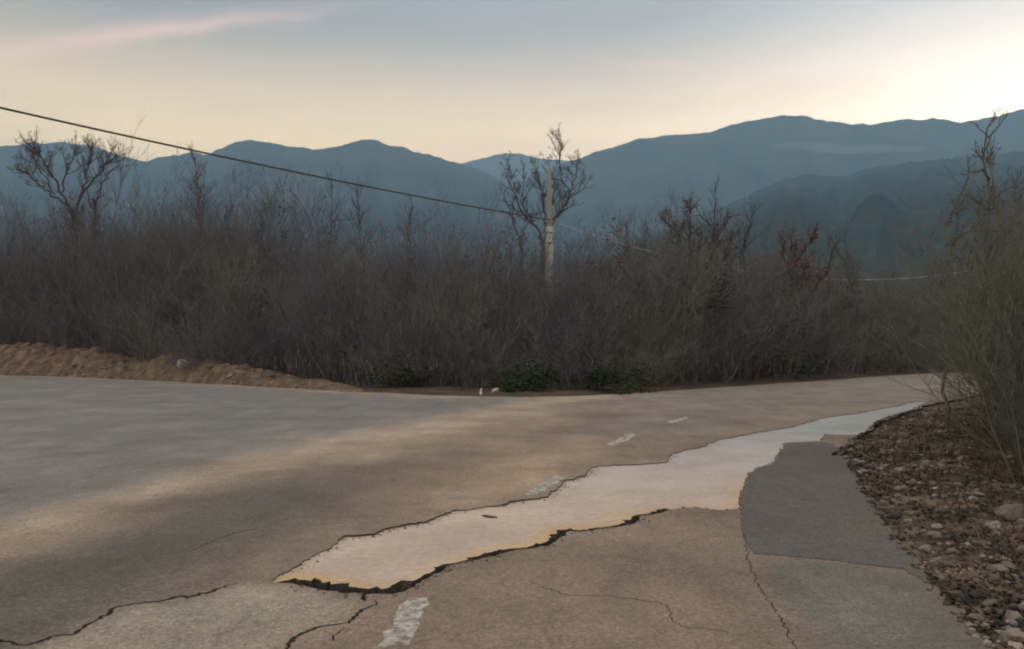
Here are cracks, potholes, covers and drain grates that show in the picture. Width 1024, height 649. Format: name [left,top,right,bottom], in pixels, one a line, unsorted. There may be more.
crack [740,518,798,649]
